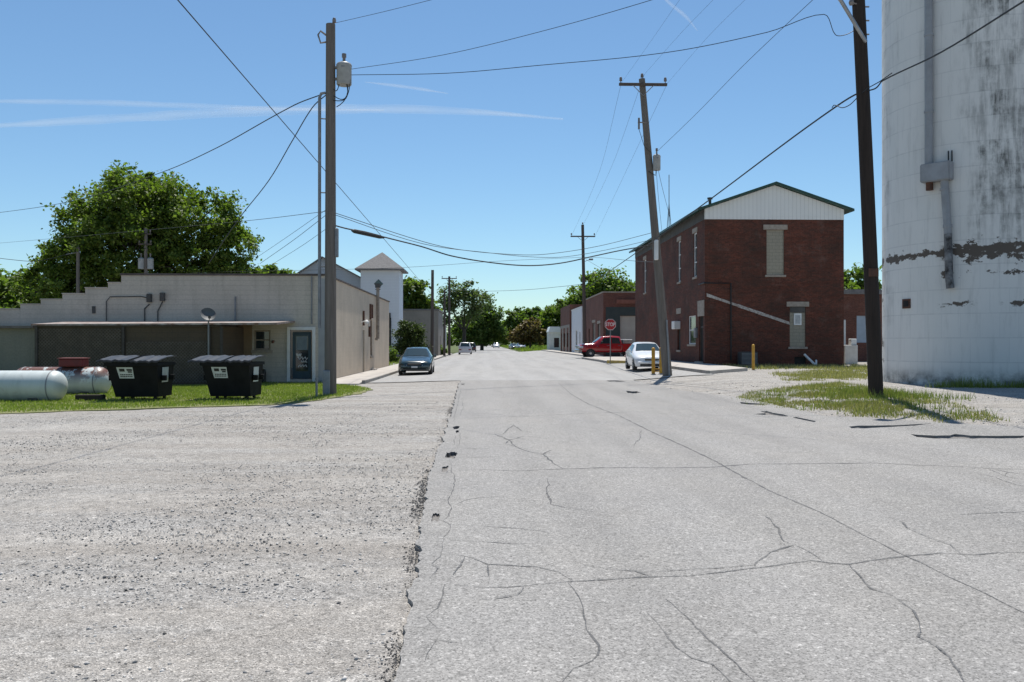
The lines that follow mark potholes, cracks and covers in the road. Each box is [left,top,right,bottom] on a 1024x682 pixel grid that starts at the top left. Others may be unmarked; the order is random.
crack [425,467,1015,681]
crack [453,391,1000,511]
